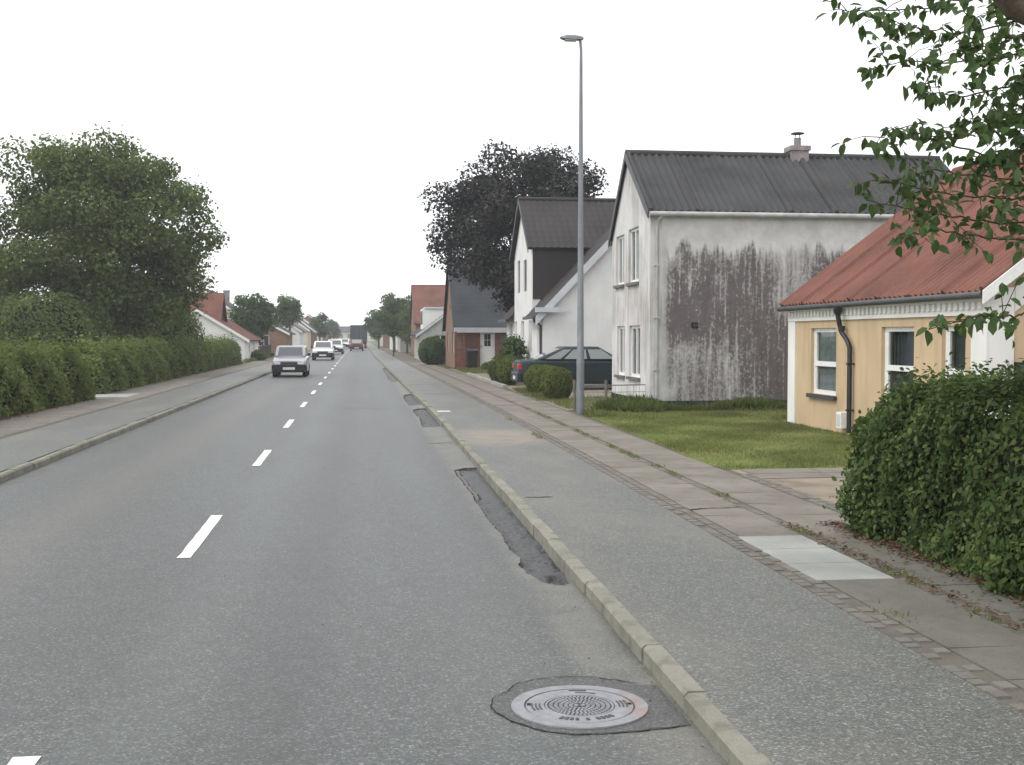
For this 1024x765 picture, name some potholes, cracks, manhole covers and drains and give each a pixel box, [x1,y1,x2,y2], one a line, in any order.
pothole [404,394,420,406]
pothole [413,408,440,427]
pothole [454,468,569,585]
manhole cover [511,685,648,729]
